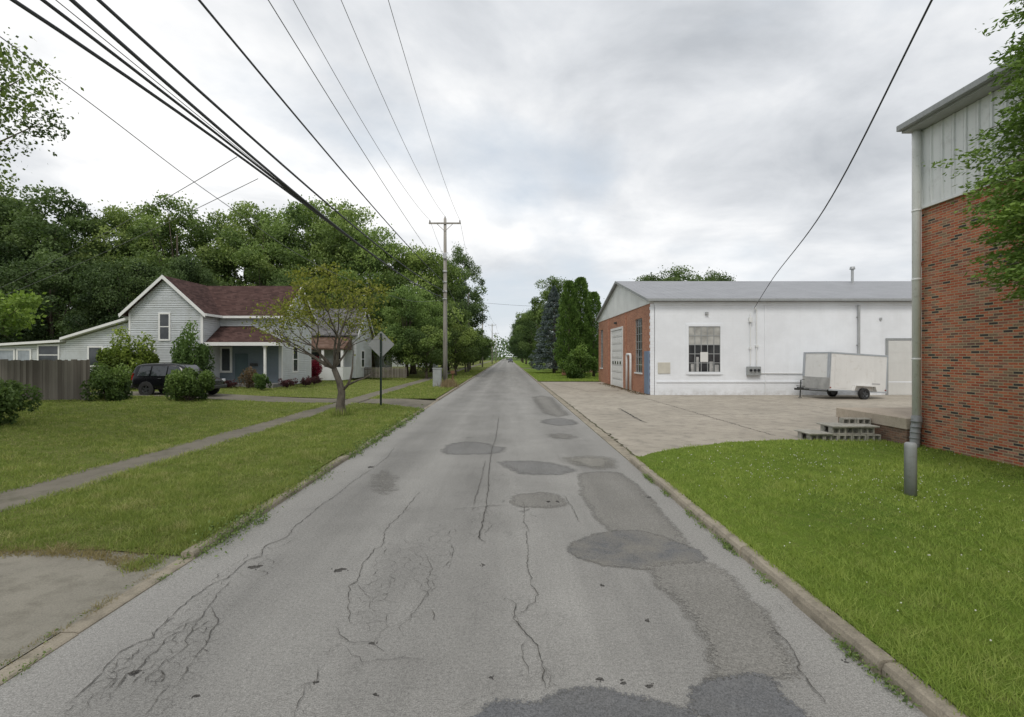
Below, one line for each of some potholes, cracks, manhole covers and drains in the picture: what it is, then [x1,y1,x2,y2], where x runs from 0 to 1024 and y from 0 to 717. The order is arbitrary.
crack [66,453,390,717]
crack [504,502,562,685]
crack [774,629,834,701]
crack [268,420,499,713]
